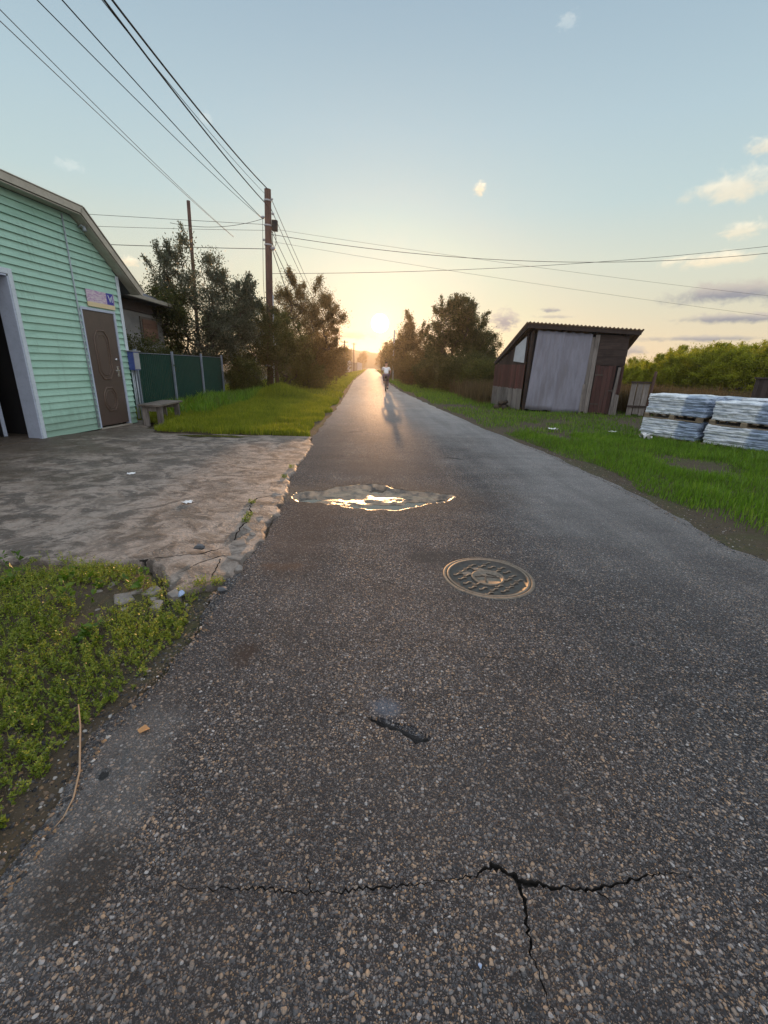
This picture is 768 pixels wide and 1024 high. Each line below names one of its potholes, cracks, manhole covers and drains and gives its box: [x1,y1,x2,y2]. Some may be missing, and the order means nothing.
pothole [289,483,456,511]
manhole cover [442,558,535,599]
crack [176,861,696,1015]
pothole [369,717,432,744]
crack [139,495,270,578]
pothole [95,767,111,781]
